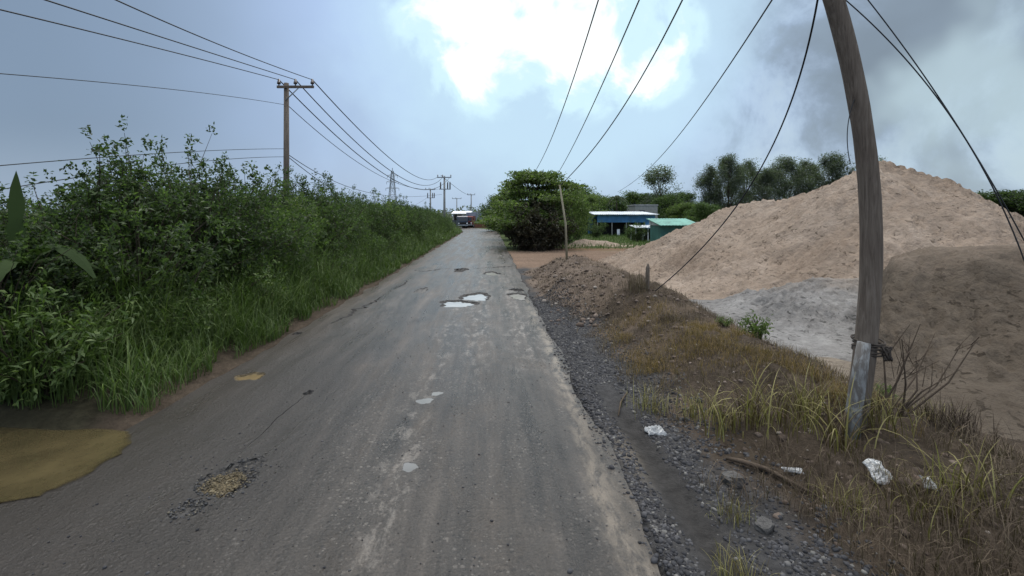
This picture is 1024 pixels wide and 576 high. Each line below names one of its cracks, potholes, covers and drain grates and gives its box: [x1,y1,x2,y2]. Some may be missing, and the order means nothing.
pothole [402,462,419,472]
crack [330,269,439,324]
pothole [458,292,491,301]
pothole [182,452,279,506]
